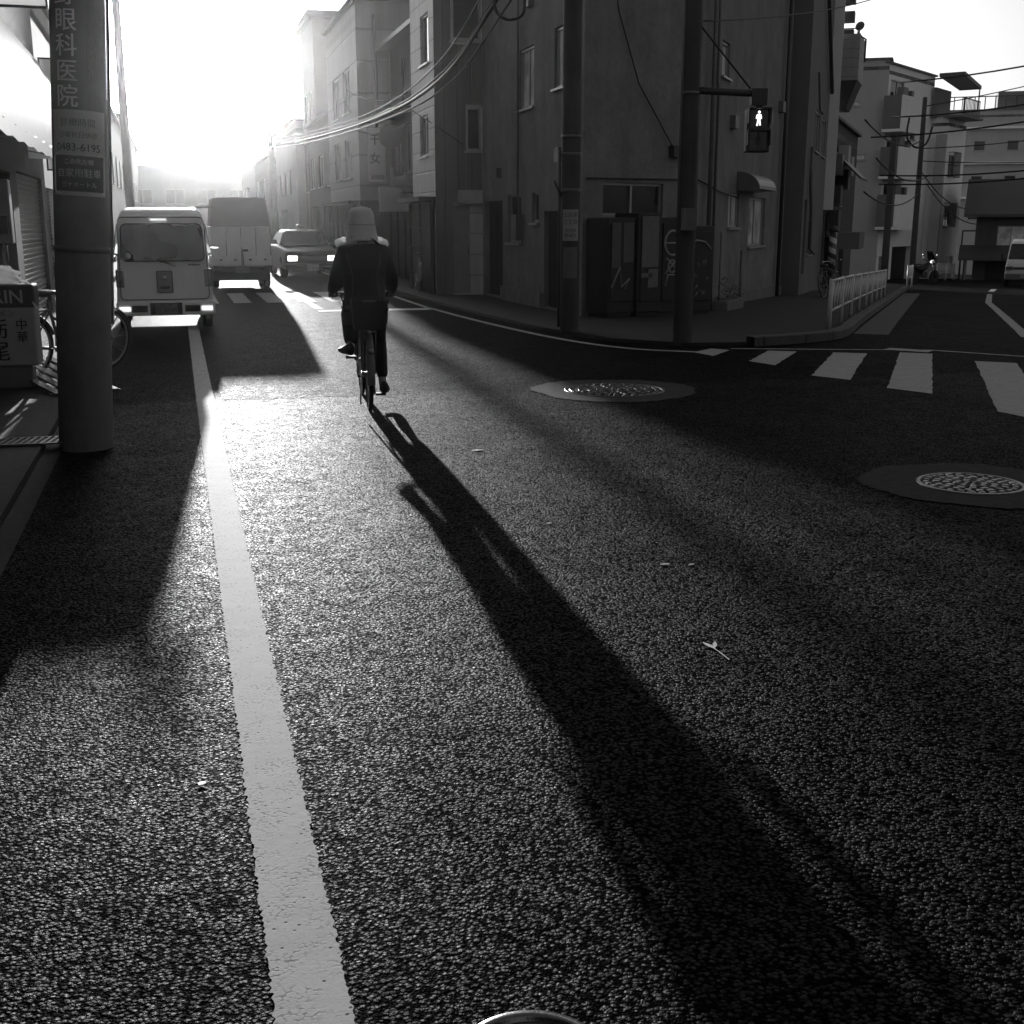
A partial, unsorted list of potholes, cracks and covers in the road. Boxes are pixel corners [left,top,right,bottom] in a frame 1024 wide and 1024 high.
manhole cover [857,463,1024,509]
manhole cover [530,380,697,402]
